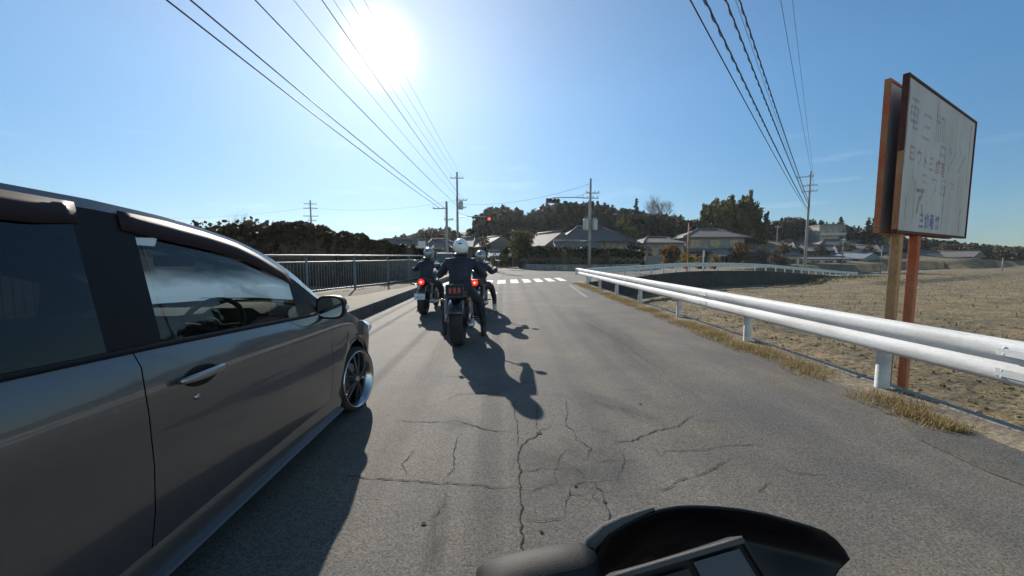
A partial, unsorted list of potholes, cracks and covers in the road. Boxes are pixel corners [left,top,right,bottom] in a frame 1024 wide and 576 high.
crack [349,392,754,550]
